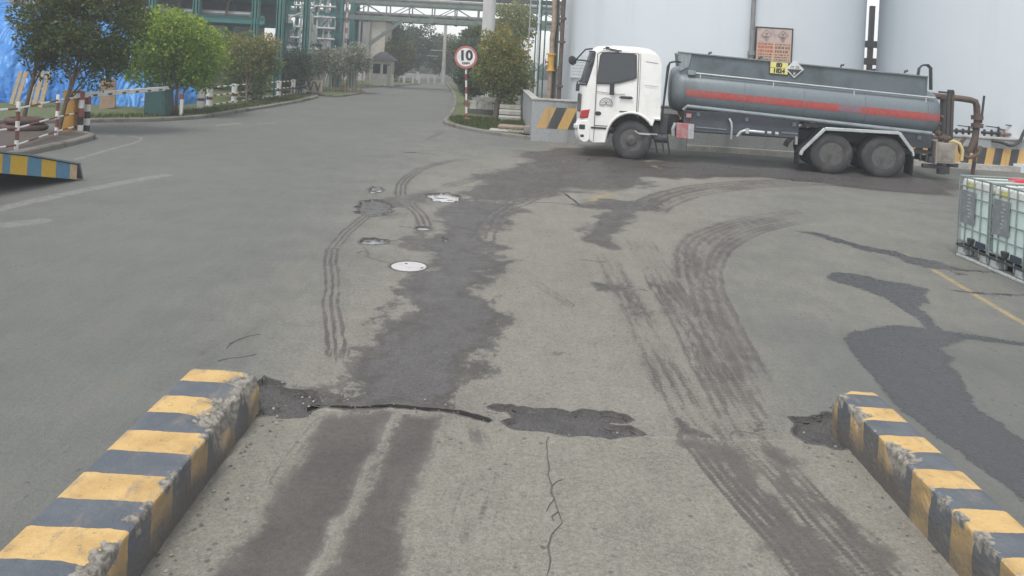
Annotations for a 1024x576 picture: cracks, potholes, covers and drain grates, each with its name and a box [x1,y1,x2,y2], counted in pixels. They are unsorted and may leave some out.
crack [219,334,260,361]
pothole [357,237,391,245]
crack [462,193,579,205]
pothole [352,199,395,217]
pothole [787,411,849,450]
crack [546,437,563,575]
pothole [256,375,323,419]
manhole cover [388,261,430,272]
